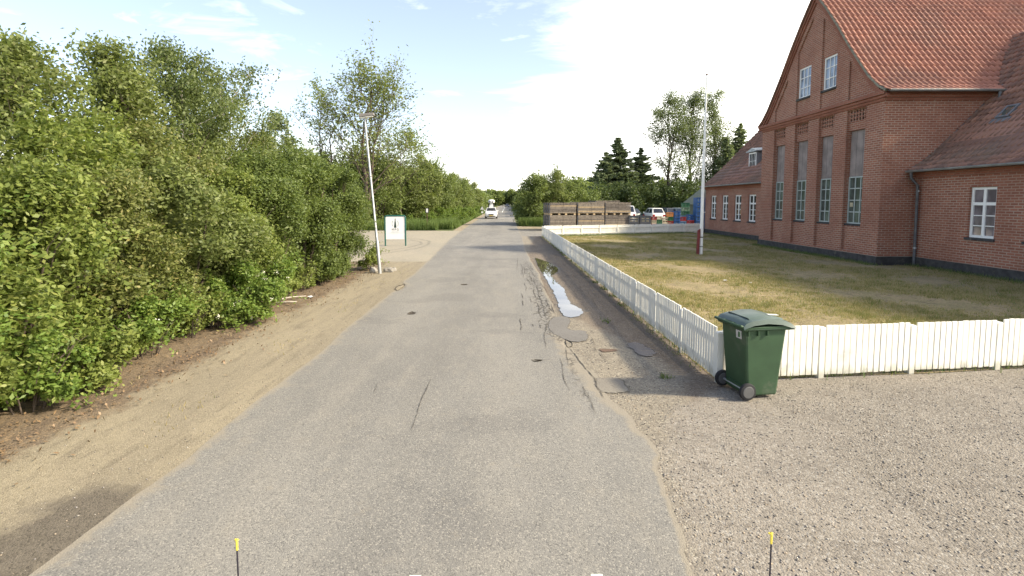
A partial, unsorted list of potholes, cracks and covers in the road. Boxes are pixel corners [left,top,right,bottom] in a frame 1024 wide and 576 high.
crack [517,258,606,414]
